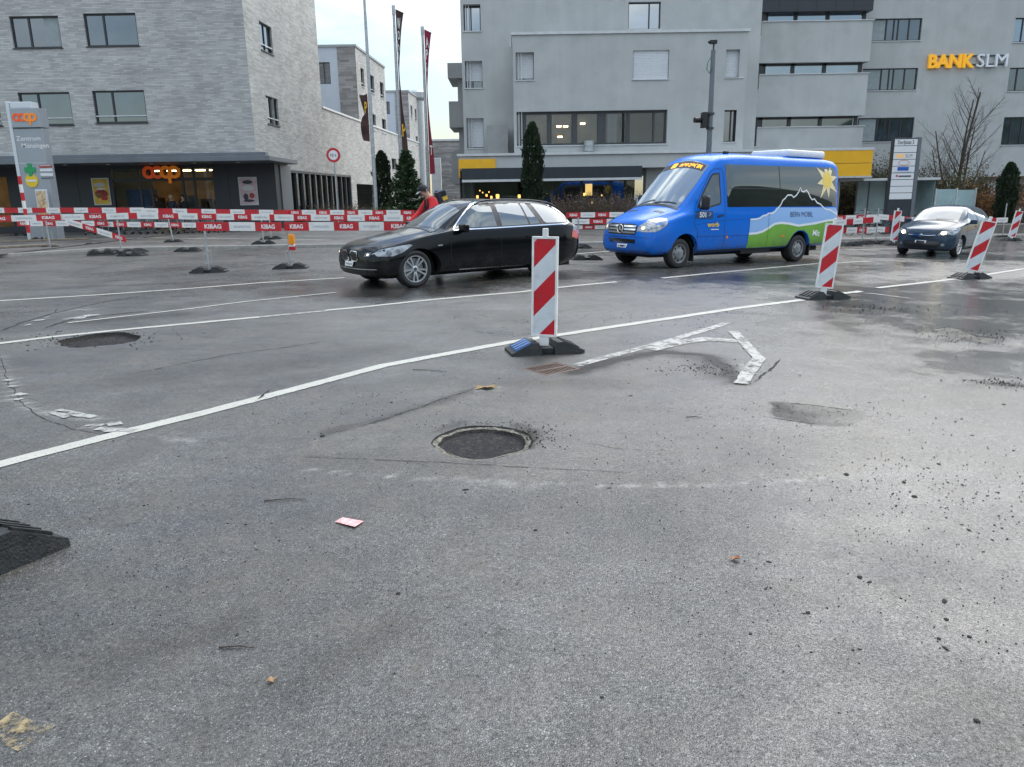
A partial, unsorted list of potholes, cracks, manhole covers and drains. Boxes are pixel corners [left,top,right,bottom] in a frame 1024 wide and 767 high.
crack [1,359,106,434]
pothole [57,332,141,348]
manhole cover [431,426,533,460]
drain grate [521,362,581,376]
